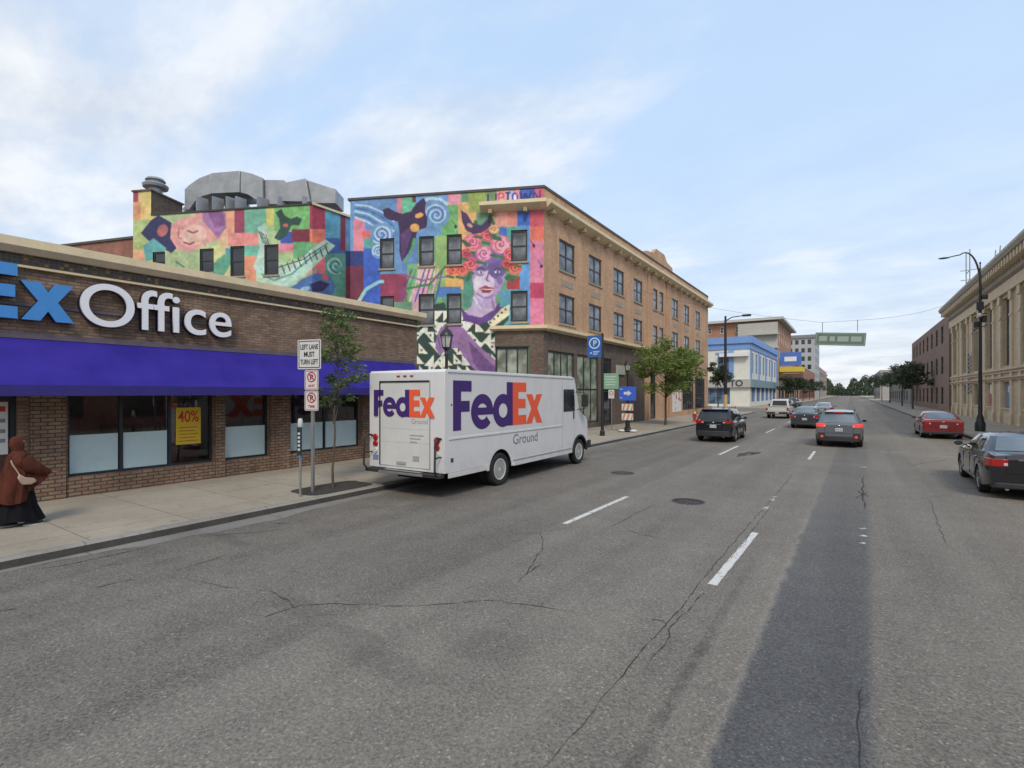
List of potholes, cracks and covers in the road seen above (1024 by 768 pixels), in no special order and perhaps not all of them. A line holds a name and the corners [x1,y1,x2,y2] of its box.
crack [262,590,570,618]
crack [507,527,571,582]
crack [856,686,865,767]
